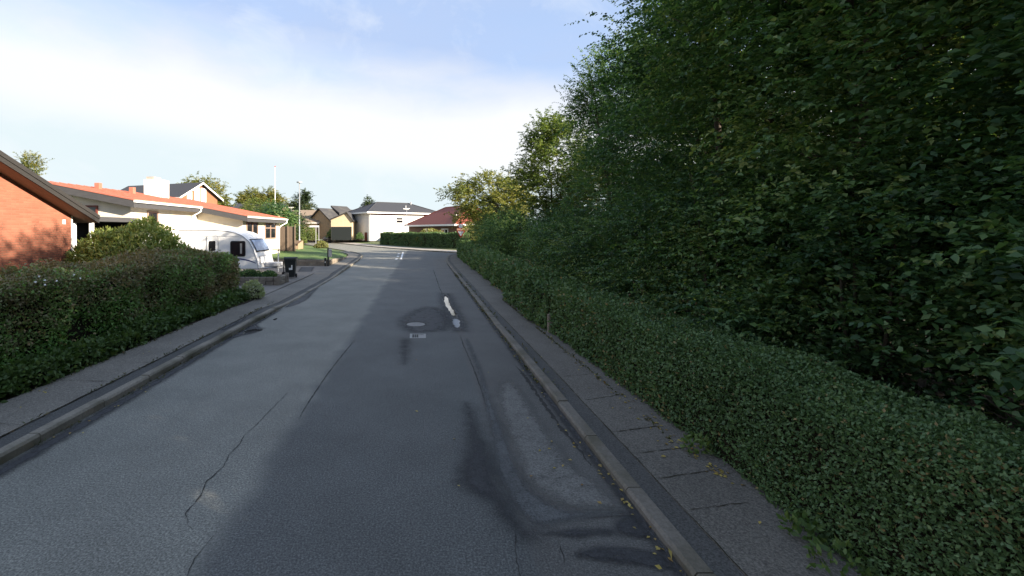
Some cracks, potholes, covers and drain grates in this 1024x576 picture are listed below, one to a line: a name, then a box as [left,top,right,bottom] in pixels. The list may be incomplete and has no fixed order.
crack [185,394,286,529]
